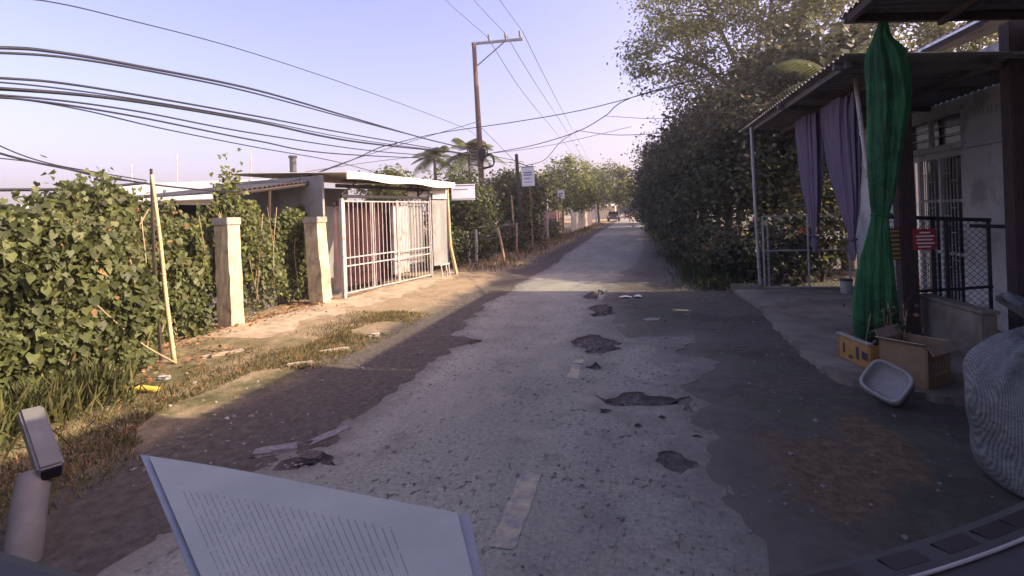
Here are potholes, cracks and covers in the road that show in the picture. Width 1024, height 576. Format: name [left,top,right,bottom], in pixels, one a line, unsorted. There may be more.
pothole [571,334,622,354]
pothole [655,451,699,474]
pothole [589,304,612,317]
pothole [273,450,336,471]
pothole [583,290,604,299]
pothole [600,392,694,412]
